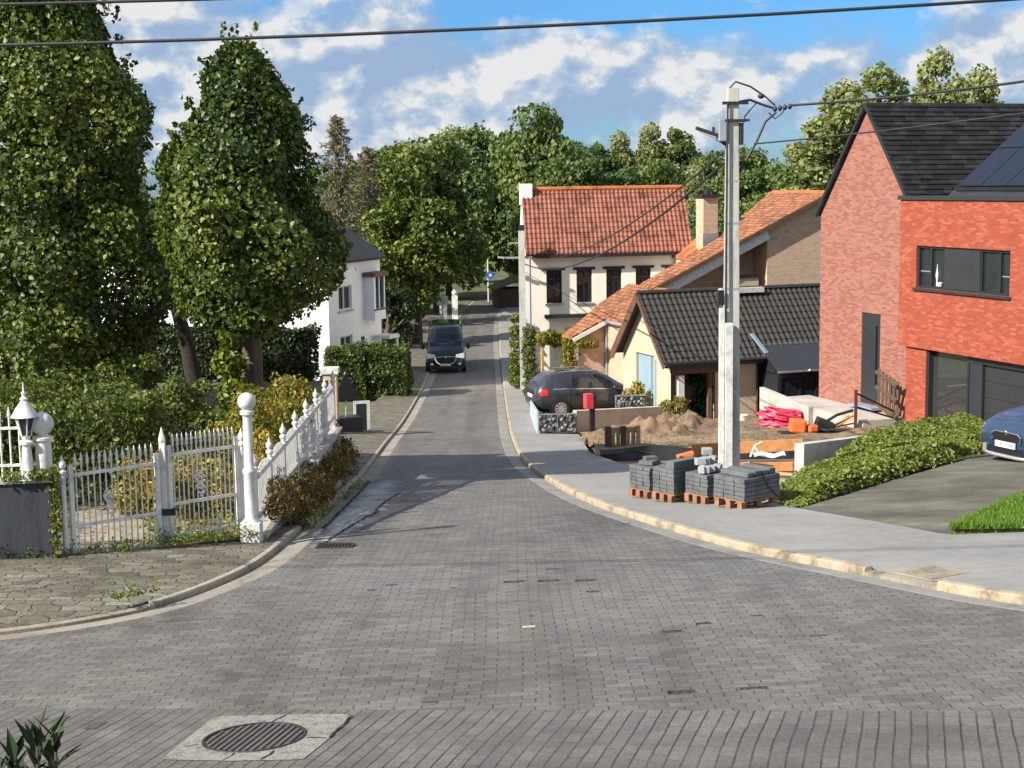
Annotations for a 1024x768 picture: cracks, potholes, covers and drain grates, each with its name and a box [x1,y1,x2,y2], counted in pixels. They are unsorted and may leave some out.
manhole cover [163,714,350,761]
